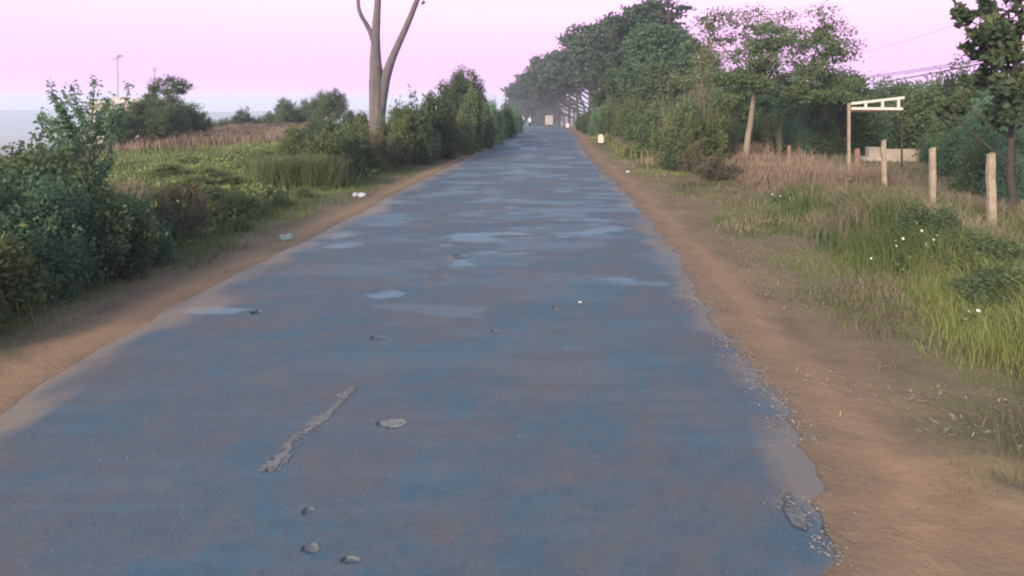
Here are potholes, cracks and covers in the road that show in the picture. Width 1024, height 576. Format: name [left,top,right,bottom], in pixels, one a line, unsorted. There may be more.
pothole [782,493,809,533]
pothole [375,418,408,429]
